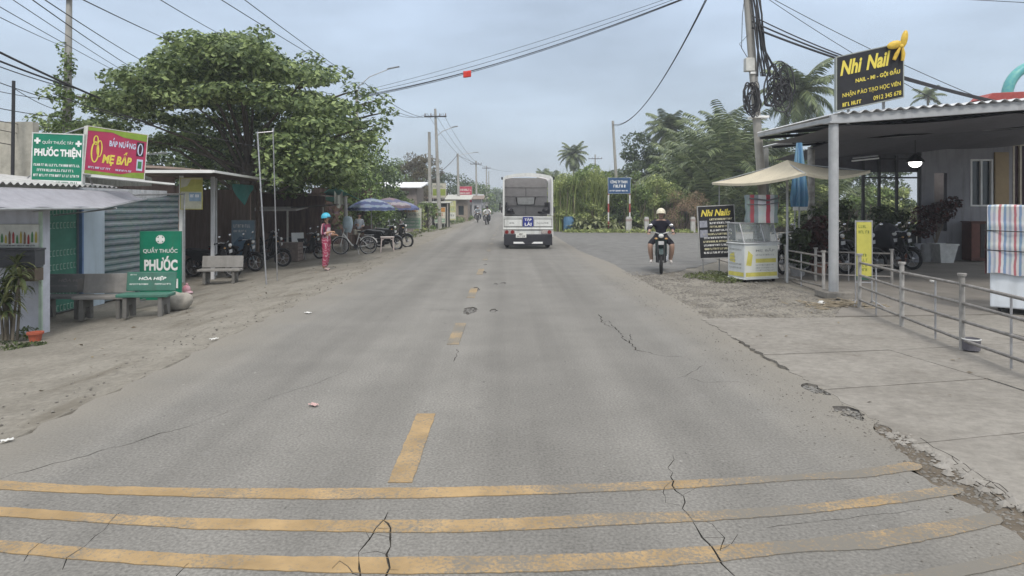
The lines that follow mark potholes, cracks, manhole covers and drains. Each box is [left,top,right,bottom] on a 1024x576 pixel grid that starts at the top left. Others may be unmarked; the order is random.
crack [921,438,1019,511]
crack [598,314,680,357]
pothole [801,383,831,395]
pothole [832,406,865,421]
crack [350,512,392,576]
crack [663,457,737,576]
